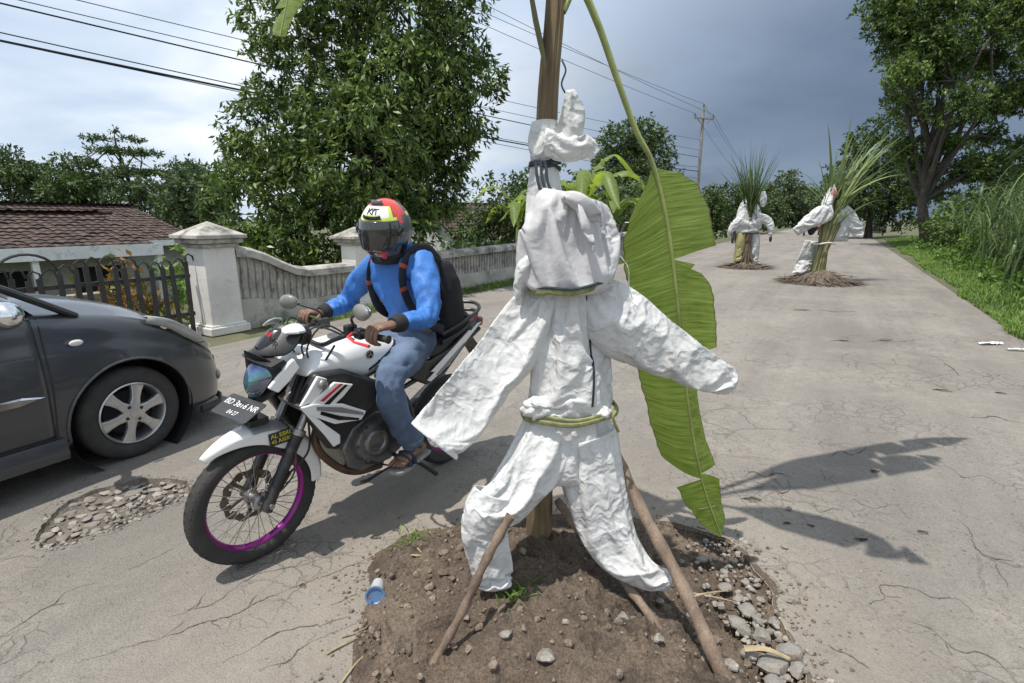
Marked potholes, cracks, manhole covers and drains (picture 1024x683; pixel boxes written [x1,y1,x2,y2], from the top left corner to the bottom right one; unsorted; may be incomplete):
crack [913,622,1008,672]
crack [720,470,792,495]
crack [0,583,94,637]
crack [870,584,973,613]
crack [86,552,365,660]
crack [958,519,1011,585]
pothole [30,477,193,551]
